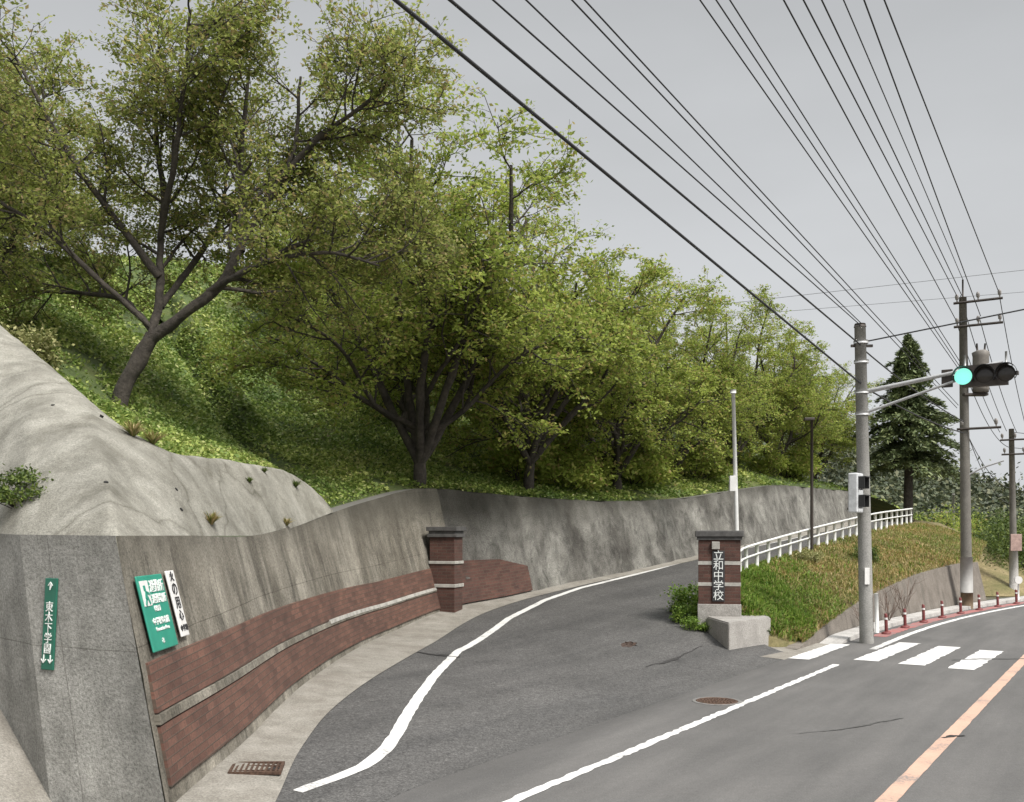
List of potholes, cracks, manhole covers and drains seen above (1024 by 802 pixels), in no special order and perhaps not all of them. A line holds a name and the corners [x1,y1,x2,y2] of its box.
manhole cover [692,697,742,705]
drain grate [227,761,285,775]
crack [646,646,701,667]
crack [792,718,900,734]
